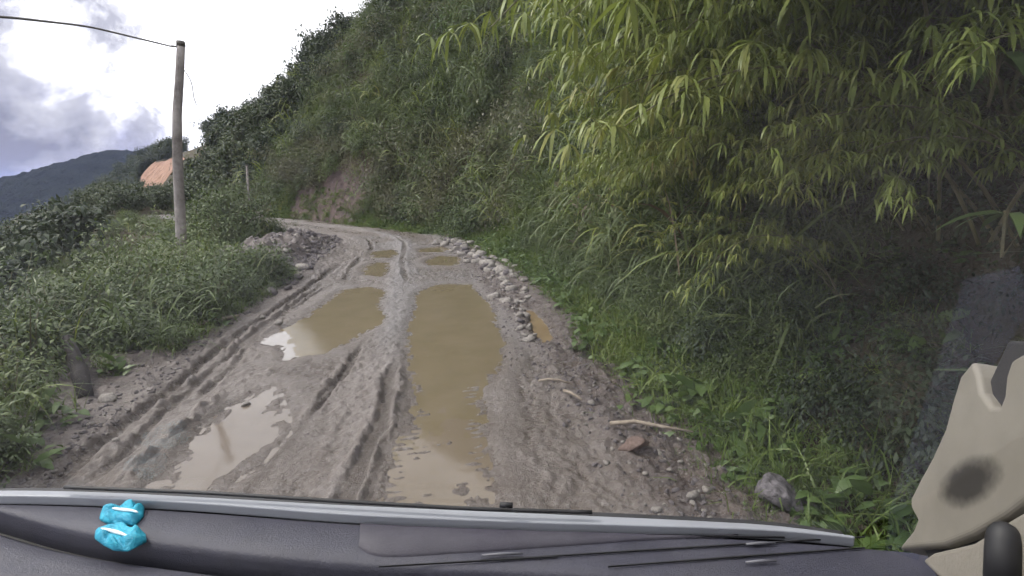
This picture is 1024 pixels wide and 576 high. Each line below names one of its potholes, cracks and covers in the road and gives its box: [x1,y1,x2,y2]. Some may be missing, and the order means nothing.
pothole [127,380,309,493]
pothole [249,284,395,363]
pothole [420,254,469,266]
pothole [356,260,395,277]
pothole [365,248,404,258]
pothole [358,281,516,508]
